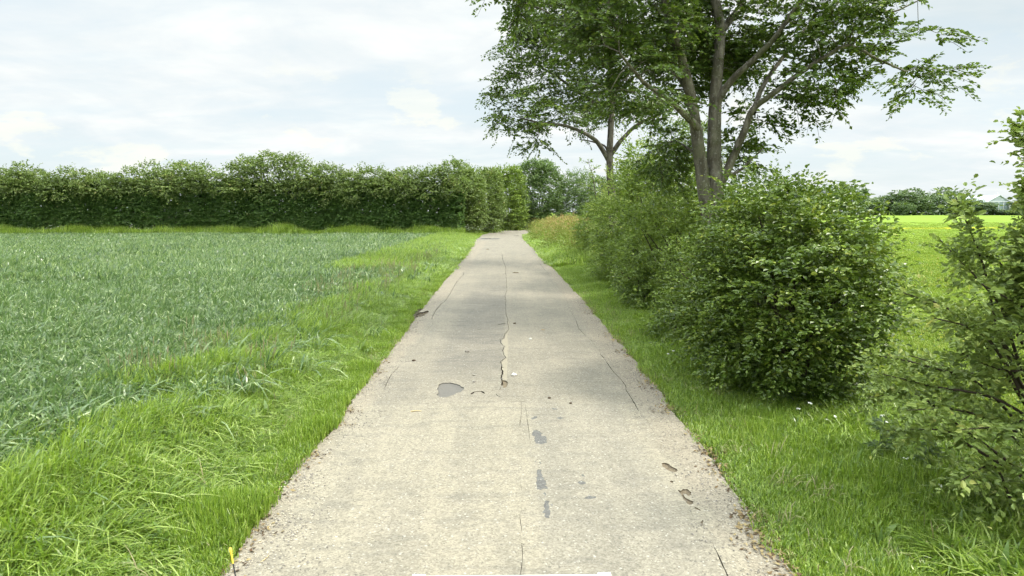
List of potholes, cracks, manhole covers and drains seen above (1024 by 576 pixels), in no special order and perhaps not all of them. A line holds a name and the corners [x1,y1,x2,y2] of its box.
pothole [678,489,693,505]
crack [471,256,511,396]
pothole [437,383,464,397]
